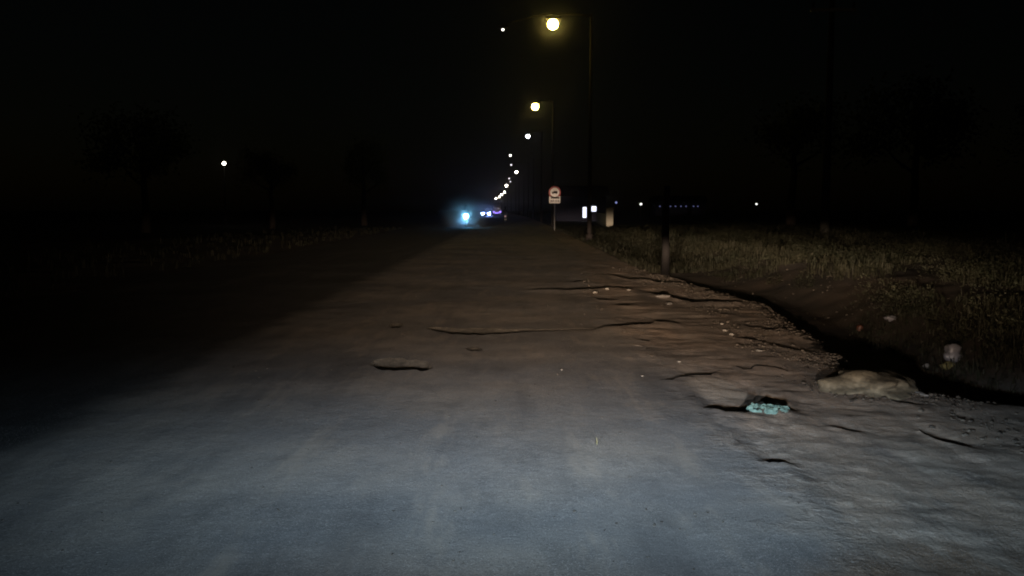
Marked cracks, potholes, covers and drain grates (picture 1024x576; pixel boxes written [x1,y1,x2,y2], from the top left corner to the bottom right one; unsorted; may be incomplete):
pothole [723,395,789,412]
crack [559,276,800,371]
crack [920,430,969,447]
